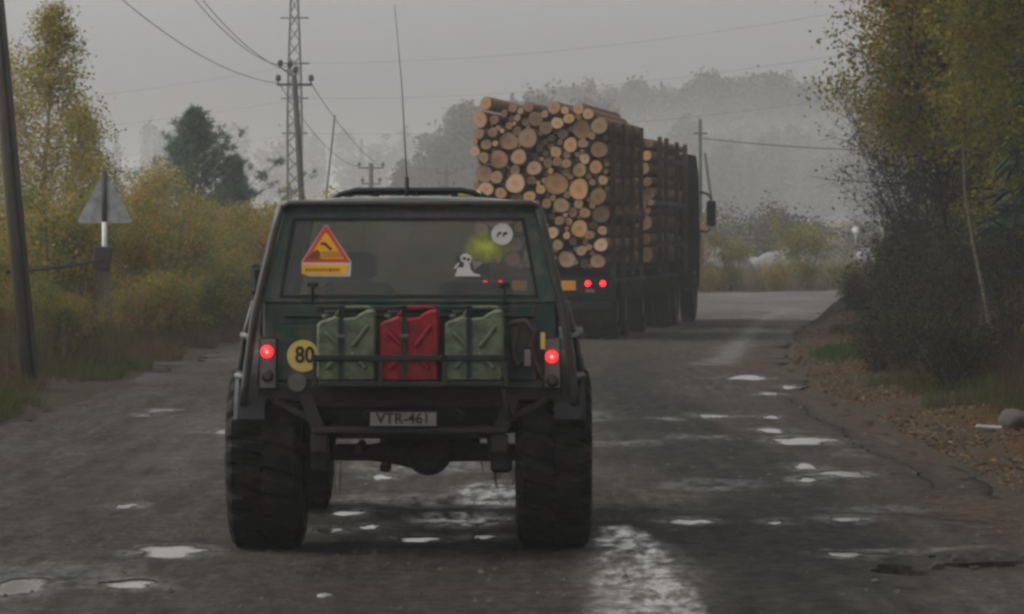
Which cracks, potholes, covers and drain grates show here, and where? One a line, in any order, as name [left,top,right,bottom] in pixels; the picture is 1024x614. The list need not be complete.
pothole [870,564,930,576]
crack [790,399,935,489]
pothole [768,437,846,445]
pothole [137,544,211,558]
pothole [98,578,159,588]
pothole [0,577,51,595]
